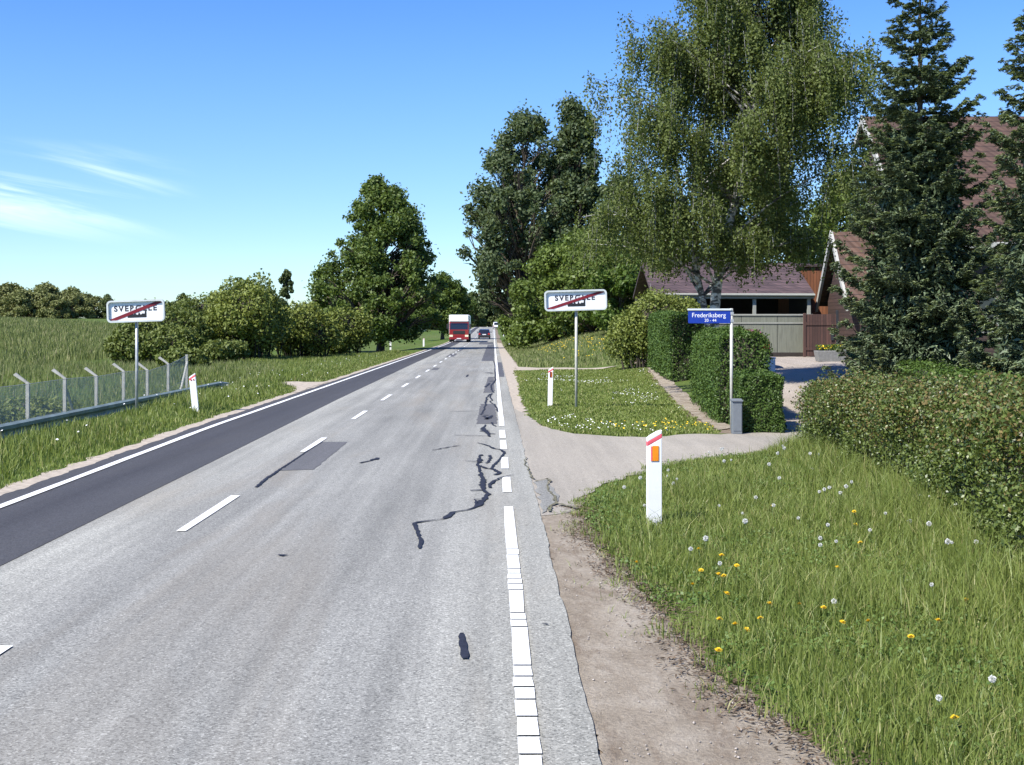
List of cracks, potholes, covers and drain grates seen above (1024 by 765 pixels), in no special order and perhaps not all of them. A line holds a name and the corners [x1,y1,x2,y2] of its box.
crack [524,457,579,511]
